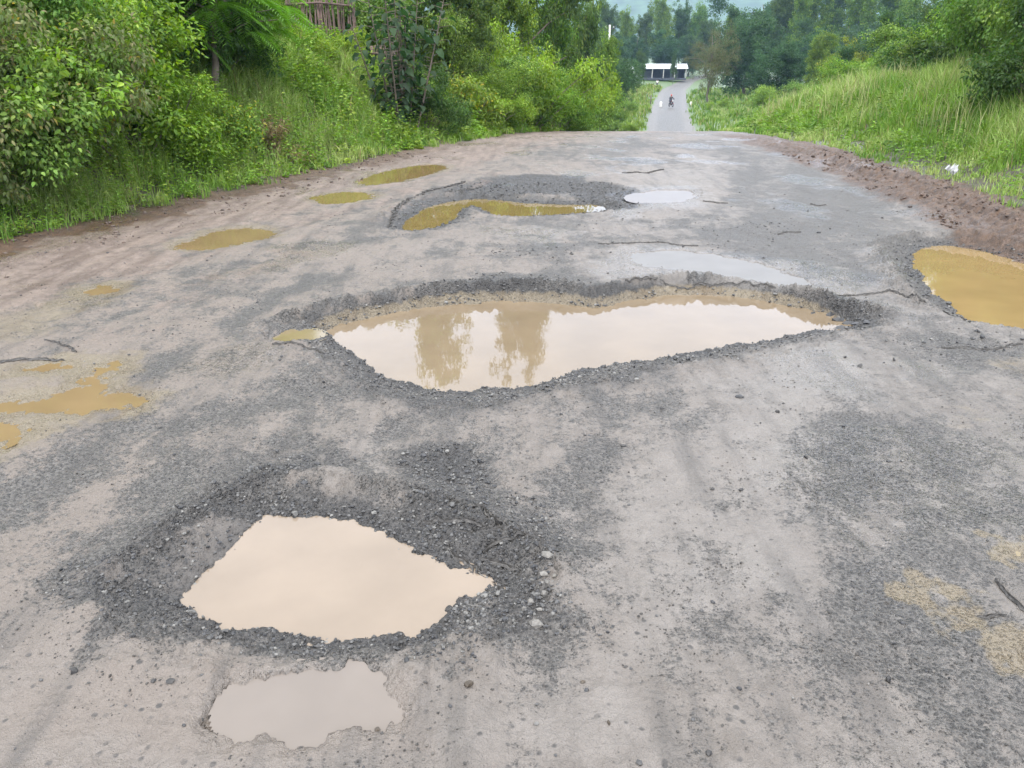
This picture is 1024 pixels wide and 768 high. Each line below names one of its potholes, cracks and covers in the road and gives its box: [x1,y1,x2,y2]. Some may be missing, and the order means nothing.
pothole [619,247,819,287]
pothole [448,173,588,195]
pothole [893,235,1024,329]
pothole [622,187,705,204]
pothole [104,472,558,669]
pothole [186,644,439,762]
pothole [260,325,333,345]
pothole [399,441,497,488]
crack [625,276,776,290]
crack [0,339,77,363]
pothole [290,270,872,400]
pothole [368,190,626,233]
